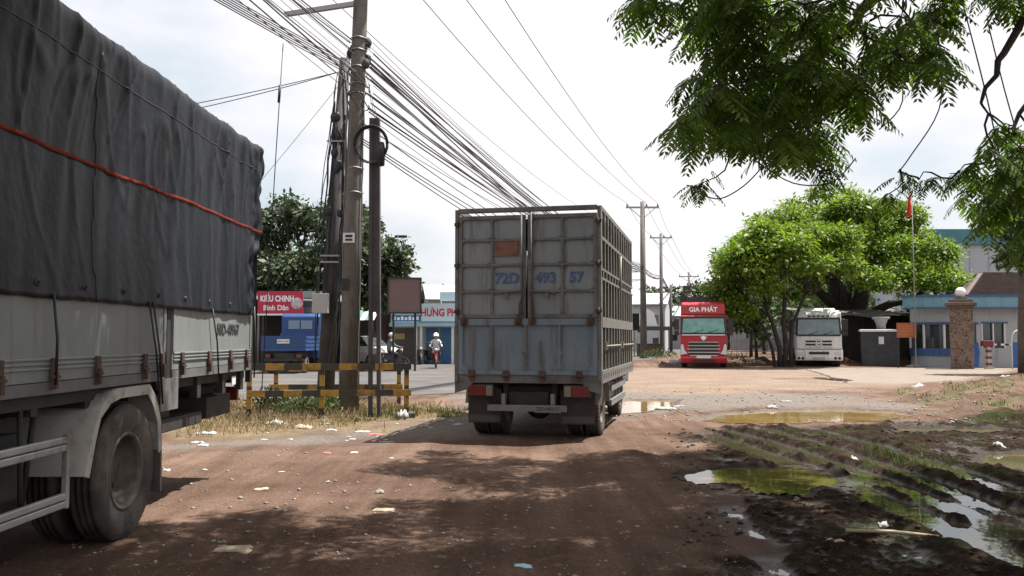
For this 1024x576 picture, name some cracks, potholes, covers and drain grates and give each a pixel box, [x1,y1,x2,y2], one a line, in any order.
crack [790,369,848,382]
pothole [685,407,919,424]
pothole [671,459,846,498]
pothole [605,398,683,414]
